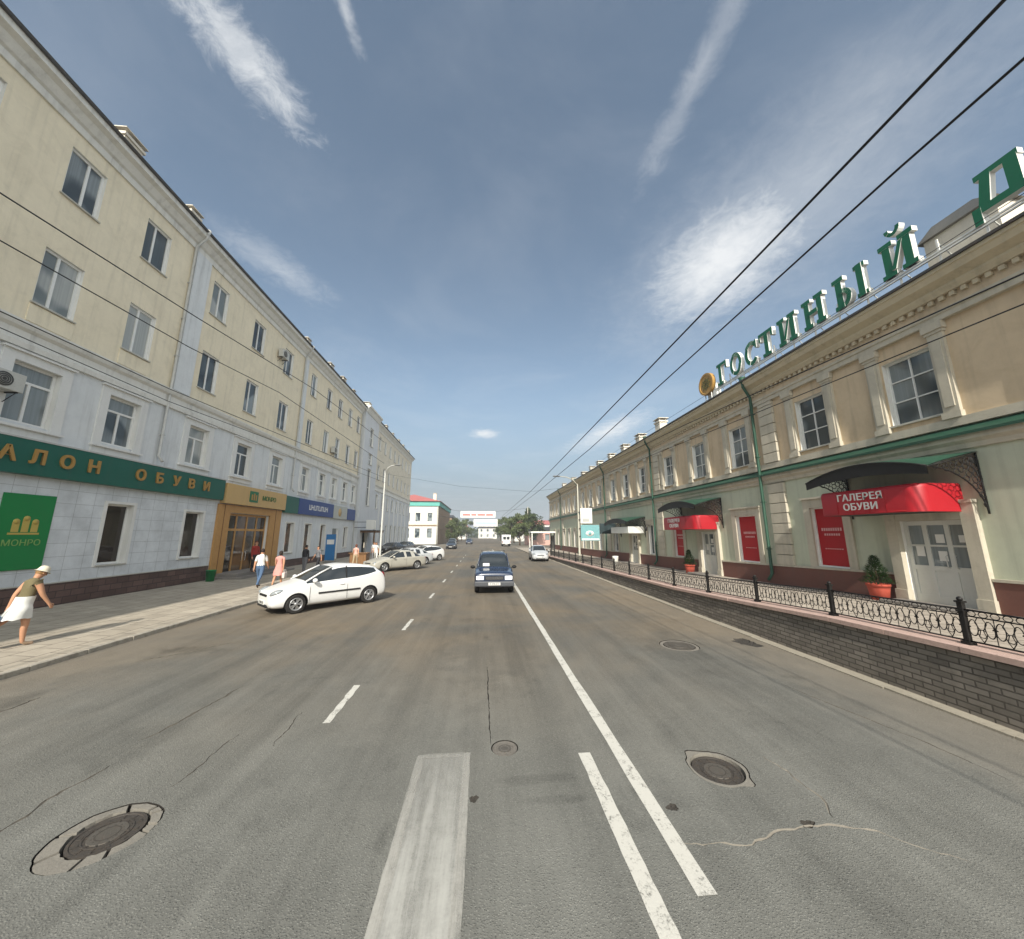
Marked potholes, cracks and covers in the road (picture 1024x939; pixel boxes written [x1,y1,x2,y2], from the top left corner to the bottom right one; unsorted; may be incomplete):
manhole cover [684,750,756,788]
crack [139,686,243,787]
manhole cover [30,802,165,876]
manhole cover [491,740,518,756]
crack [0,766,109,832]
crack [684,757,970,862]
manhole cover [659,640,700,651]
